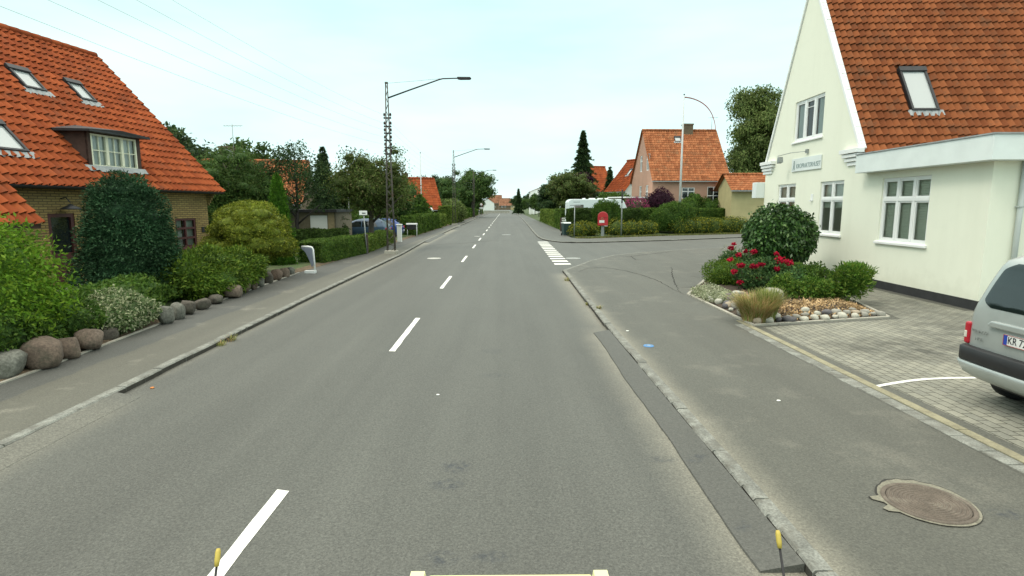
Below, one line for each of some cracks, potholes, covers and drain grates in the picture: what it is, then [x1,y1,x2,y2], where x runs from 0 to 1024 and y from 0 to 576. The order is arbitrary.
crack [578,252,694,294]
manhole cover [868,478,983,527]
